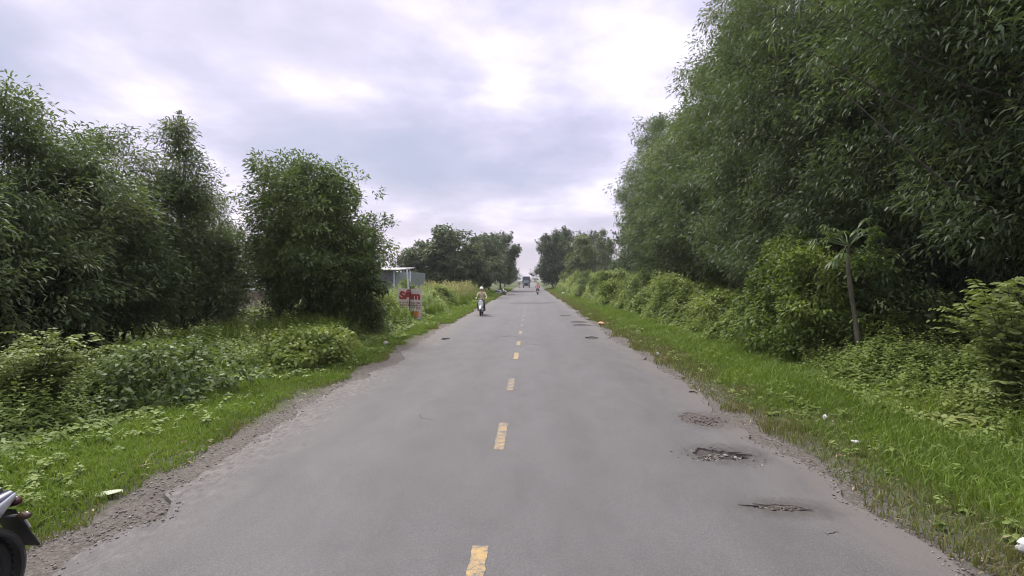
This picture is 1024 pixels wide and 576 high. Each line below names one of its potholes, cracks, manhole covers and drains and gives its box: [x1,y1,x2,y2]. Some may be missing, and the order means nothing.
pothole [739,503,814,512]
pothole [678,412,728,429]
pothole [670,444,772,466]
